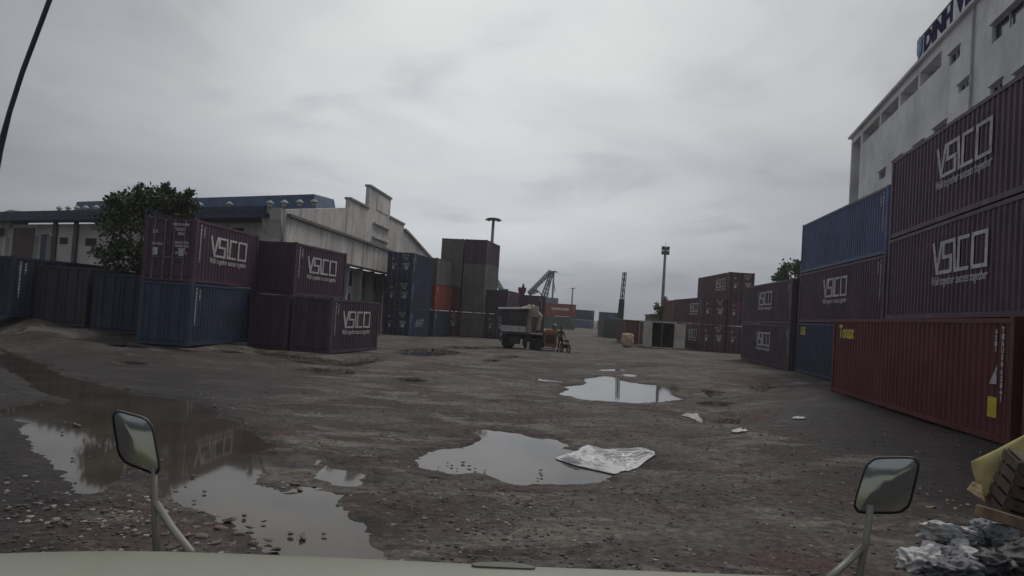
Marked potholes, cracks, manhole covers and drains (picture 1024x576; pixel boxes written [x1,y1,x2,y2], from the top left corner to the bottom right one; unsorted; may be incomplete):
pothole [536,373,709,404]
pothole [383,348,472,357]
pothole [378,422,657,493]
pothole [0,339,441,562]
pothole [671,388,741,399]
